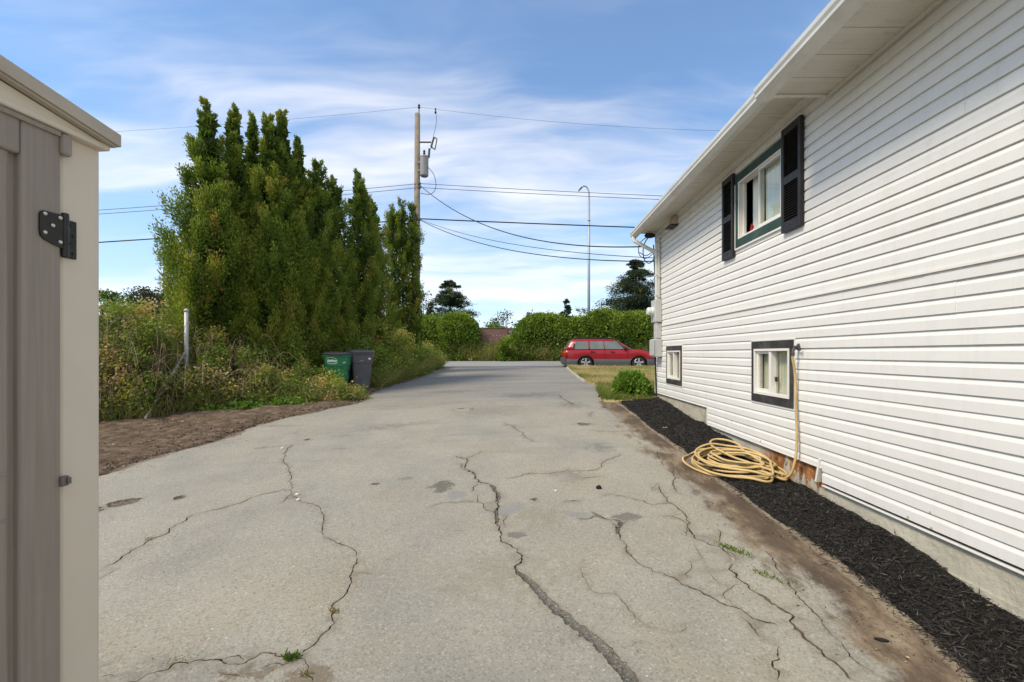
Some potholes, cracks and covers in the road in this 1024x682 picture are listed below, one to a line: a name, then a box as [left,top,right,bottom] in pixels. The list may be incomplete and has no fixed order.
pothole [106,498,143,507]
crack [103,444,365,682]
crack [616,451,872,681]
crack [436,453,642,682]
